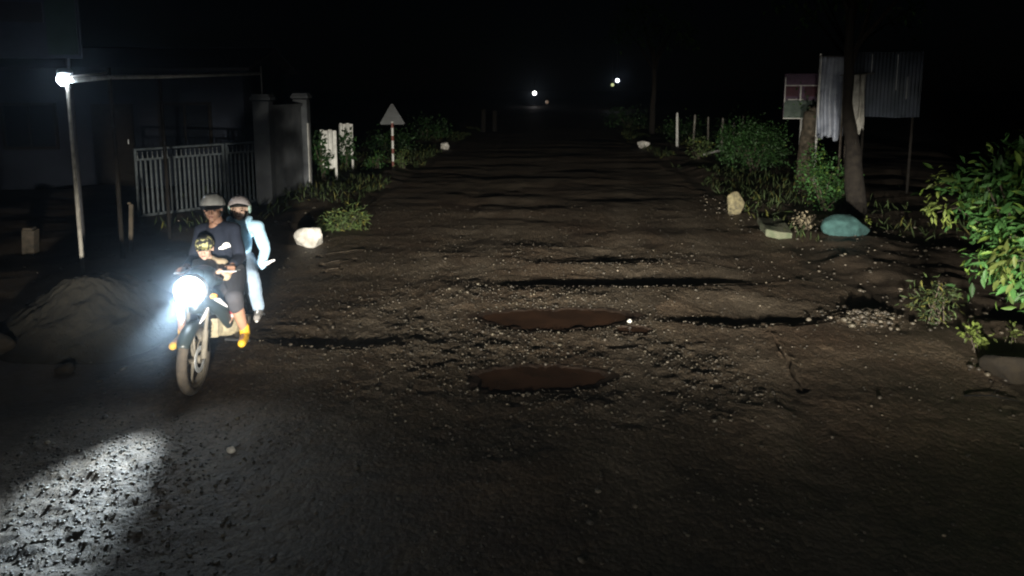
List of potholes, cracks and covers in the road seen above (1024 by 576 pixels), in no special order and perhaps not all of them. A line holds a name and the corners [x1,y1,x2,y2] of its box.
pothole [468,262,781,288]
pothole [251,315,427,349]
pothole [652,288,840,327]
pothole [465,360,627,396]
crack [763,332,811,392]
pothole [468,305,651,333]
pothole [517,245,673,264]
